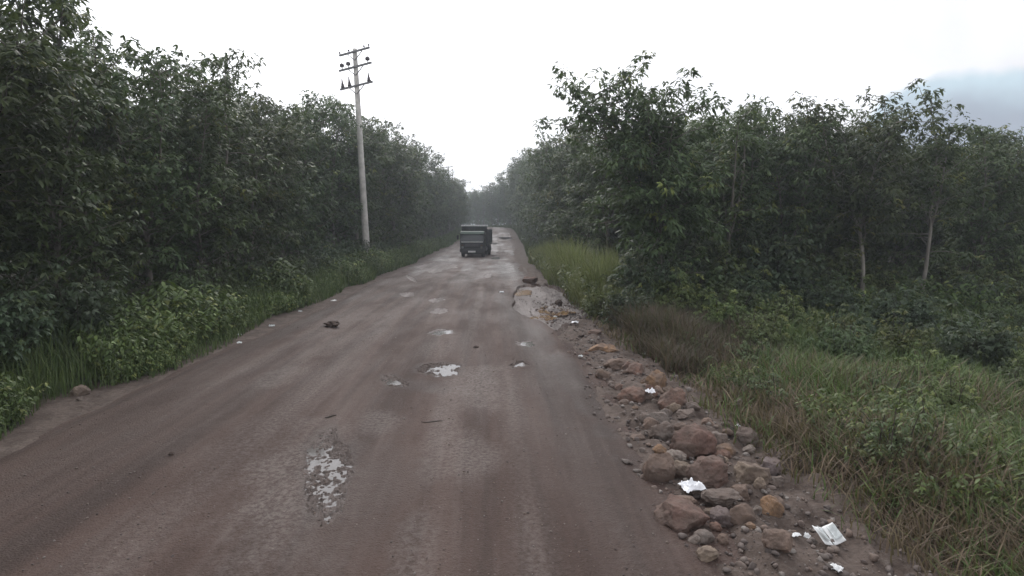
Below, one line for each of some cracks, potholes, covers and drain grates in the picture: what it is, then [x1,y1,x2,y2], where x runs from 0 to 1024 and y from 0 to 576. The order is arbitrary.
pothole [287,424,367,534]
pothole [425,307,453,315]
pothole [374,372,417,390]
pothole [421,327,460,338]
pothole [508,283,588,332]
pothole [503,359,537,370]
pothole [510,339,541,349]
pothole [409,361,468,379]
